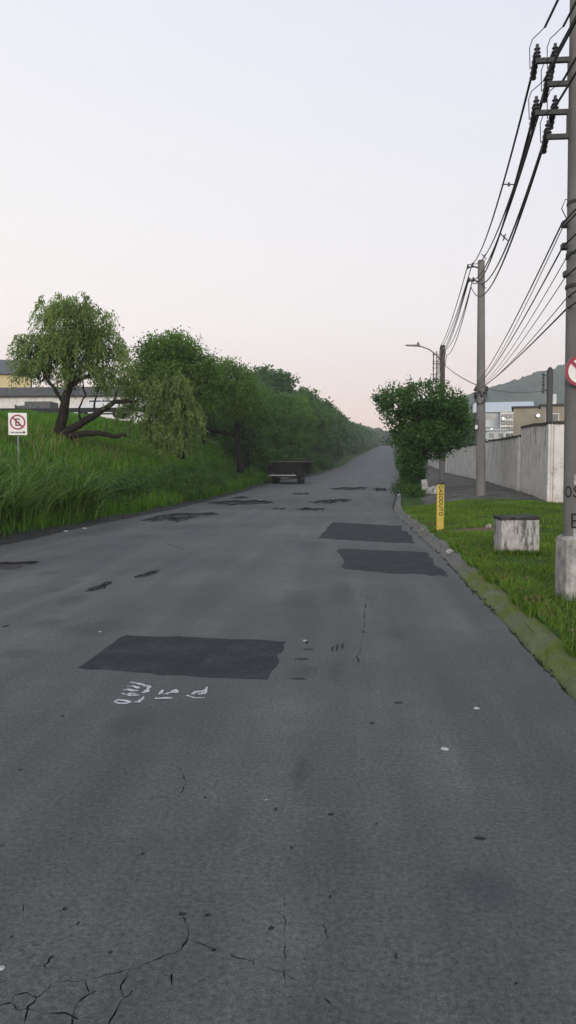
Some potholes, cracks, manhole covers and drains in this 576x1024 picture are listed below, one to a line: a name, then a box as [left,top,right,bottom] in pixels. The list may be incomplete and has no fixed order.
crack [0,917,189,1024]
pothole [84,581,112,592]
pothole [140,512,218,523]
pothole [0,561,39,570]
